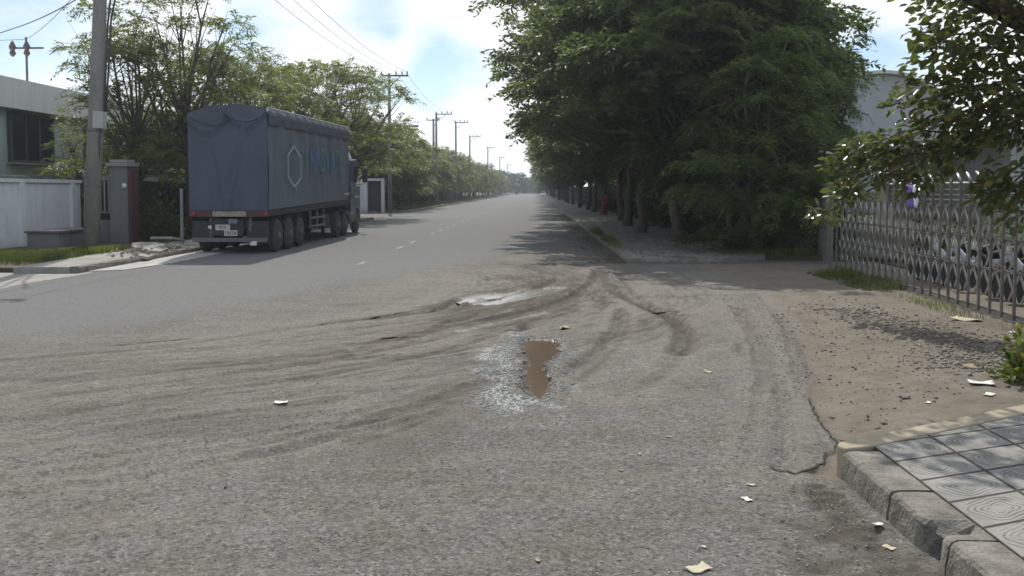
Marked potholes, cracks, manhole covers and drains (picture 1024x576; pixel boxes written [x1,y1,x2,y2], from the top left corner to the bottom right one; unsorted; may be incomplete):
crack [770,397,839,474]
pothole [515,336,569,400]
pothole [454,285,570,305]
pothole [439,297,479,309]
